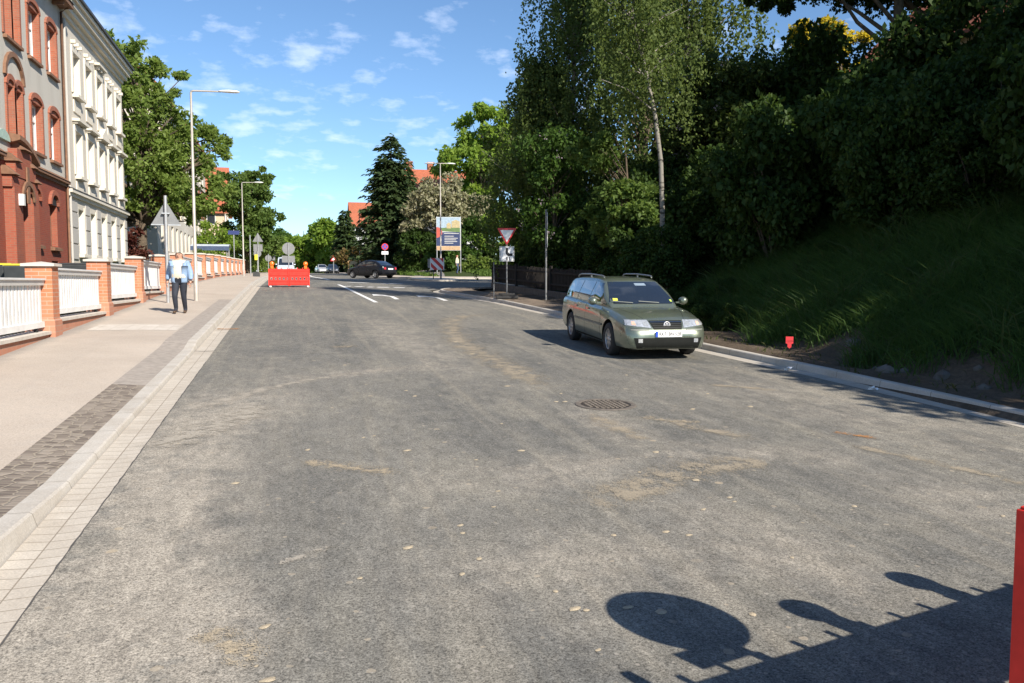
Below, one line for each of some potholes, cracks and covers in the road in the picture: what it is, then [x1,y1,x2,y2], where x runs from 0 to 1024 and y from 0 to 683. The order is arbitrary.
manhole cover [575,399,636,410]
